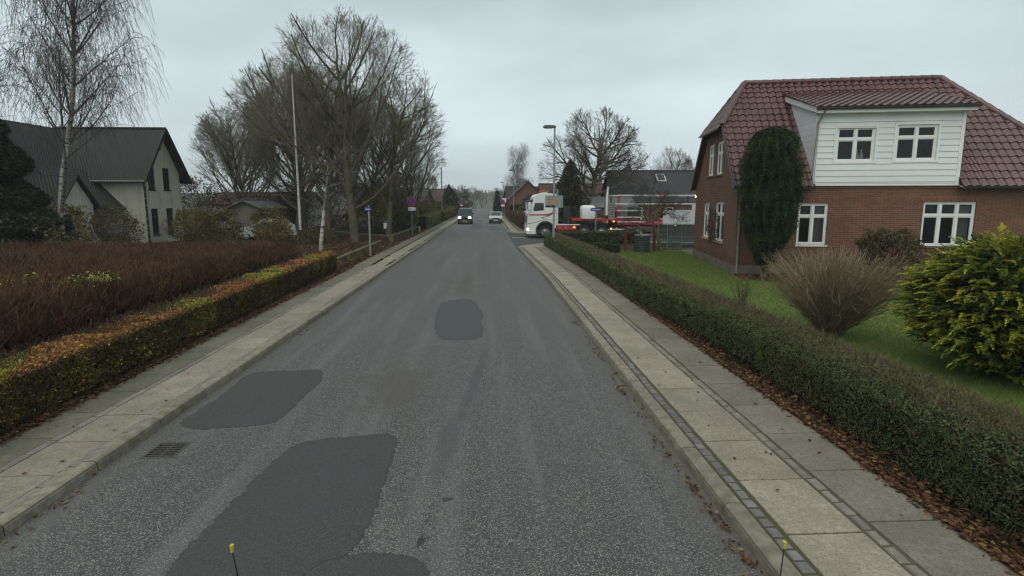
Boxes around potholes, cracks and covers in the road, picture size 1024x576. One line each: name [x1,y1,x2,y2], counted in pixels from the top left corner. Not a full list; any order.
drain grate [139,442,192,459]
